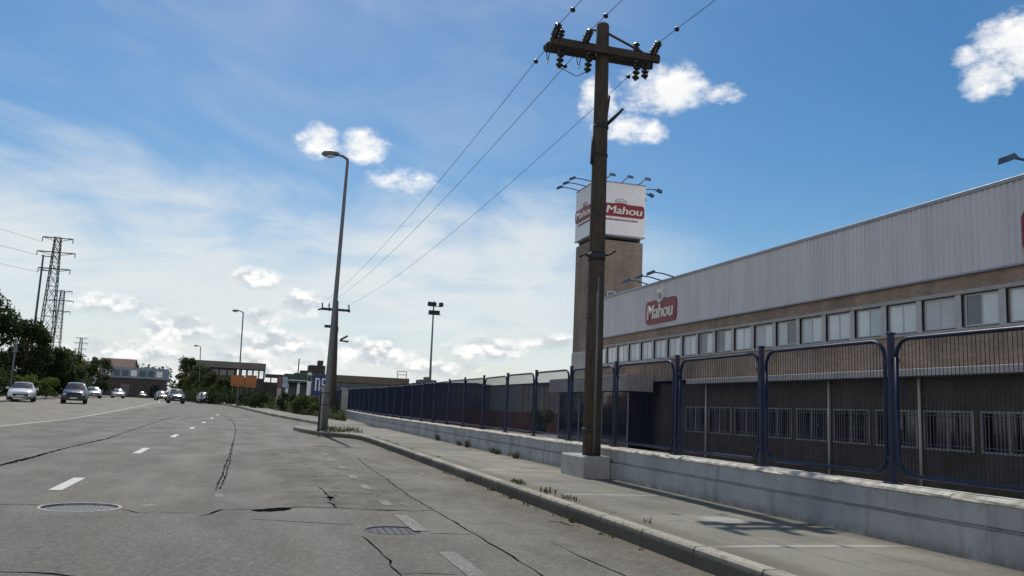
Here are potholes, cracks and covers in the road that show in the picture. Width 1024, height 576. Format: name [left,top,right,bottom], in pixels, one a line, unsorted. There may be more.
crack [215,415,236,491]
manhole cover [363,526,423,535]
crack [362,536,456,576]
manhole cover [37,502,122,512]
